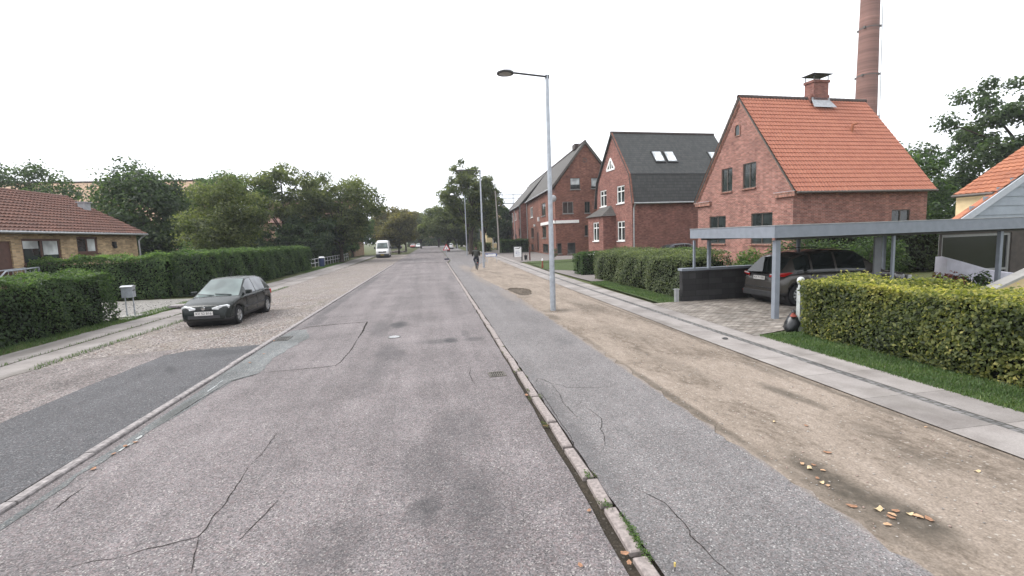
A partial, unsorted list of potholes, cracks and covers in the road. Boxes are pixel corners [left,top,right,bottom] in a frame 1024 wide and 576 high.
crack [633,487,731,574]
crack [535,378,613,492]
crack [52,433,278,573]
